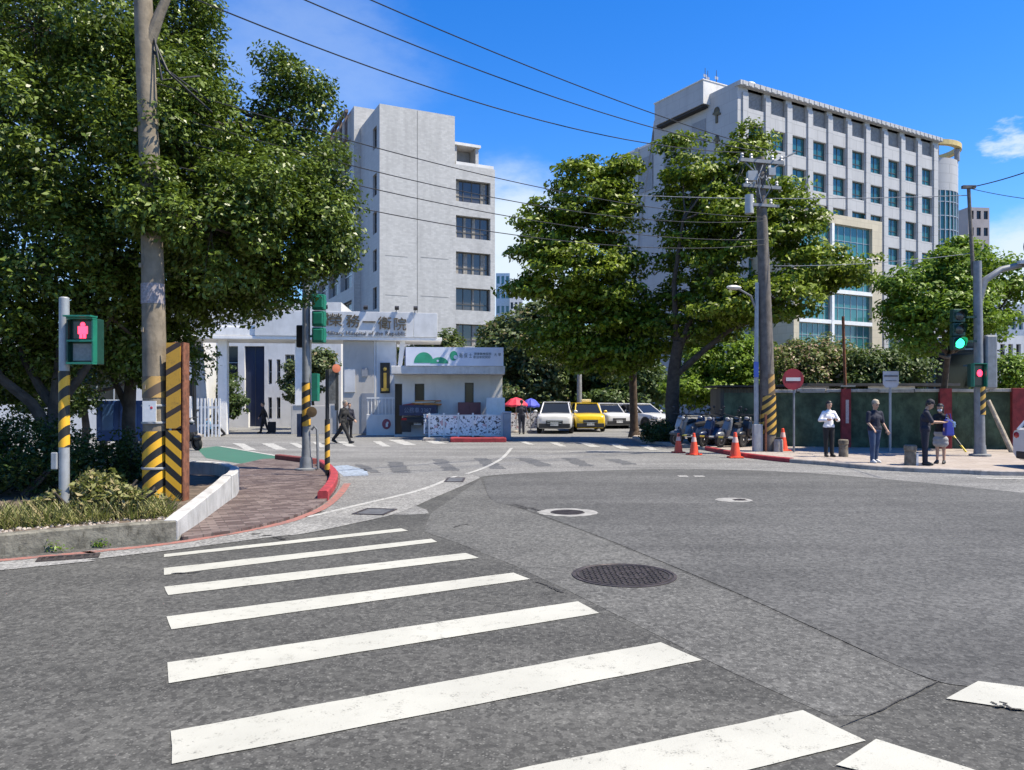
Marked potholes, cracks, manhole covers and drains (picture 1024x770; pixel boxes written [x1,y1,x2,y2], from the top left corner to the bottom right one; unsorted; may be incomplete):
crack [991,701,1022,710]
drain grate [35,553,100,562]
manhole cover [537,508,598,517]
manhole cover [572,563,677,588]
